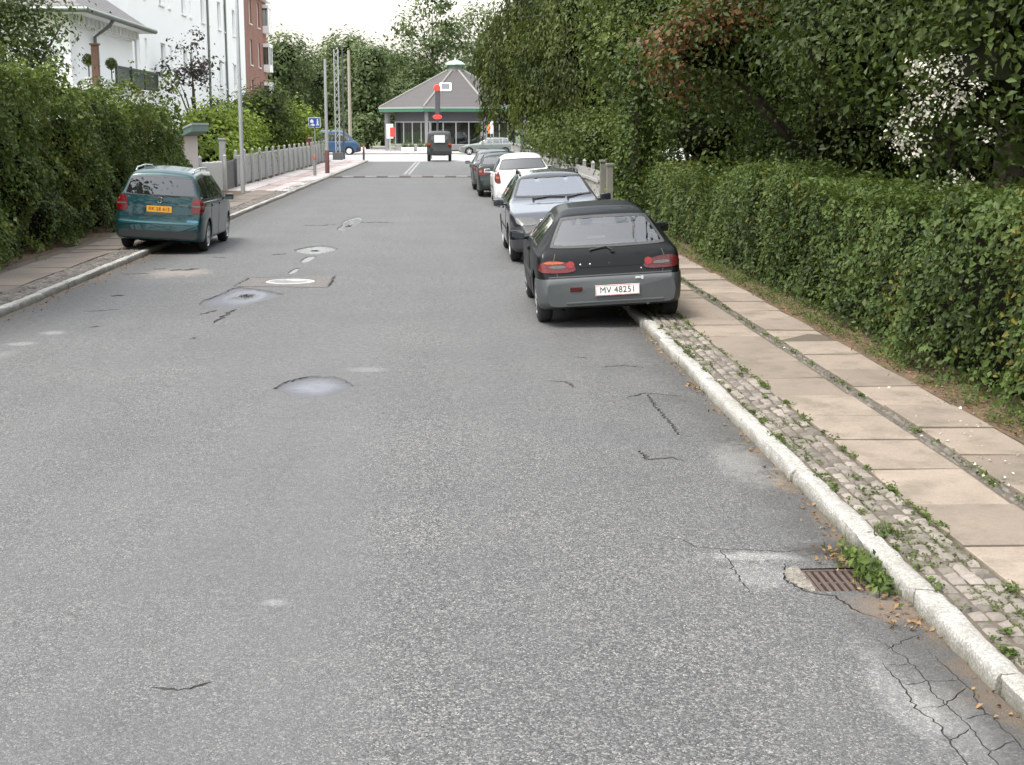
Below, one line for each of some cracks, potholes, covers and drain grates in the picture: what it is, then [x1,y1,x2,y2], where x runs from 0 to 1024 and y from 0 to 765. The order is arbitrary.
crack [674,538,870,616]
pothole [293,246,338,254]
pothole [273,376,354,397]
crack [629,393,685,461]
drain grate [784,566,879,617]
crack [882,636,1024,765]
crack [157,682,211,691]
pothole [337,216,364,230]
pothole [198,287,284,307]
